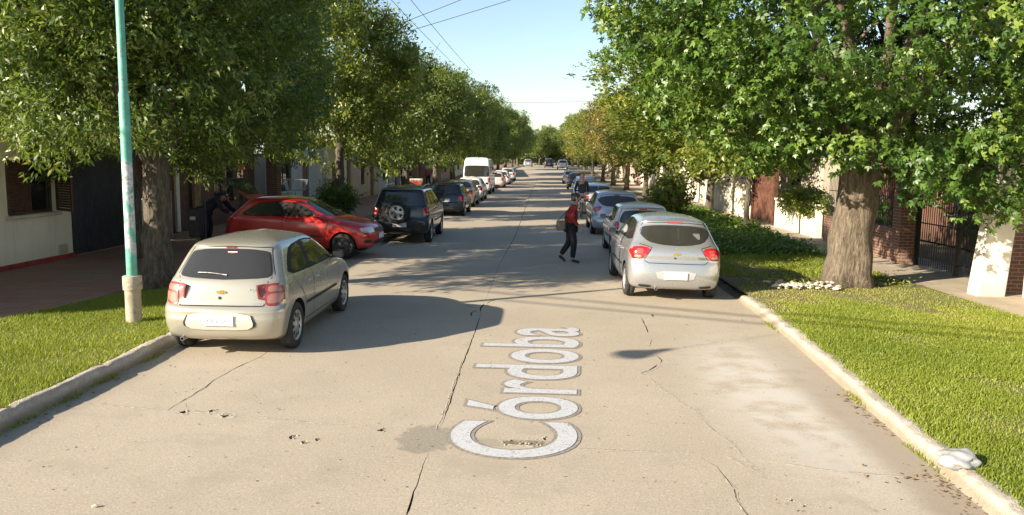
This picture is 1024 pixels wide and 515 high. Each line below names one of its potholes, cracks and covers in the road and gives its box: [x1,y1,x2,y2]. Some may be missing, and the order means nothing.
crack [169,344,279,410]
crack [642,319,766,515]
pothole [498,438,550,447]
crack [406,187,534,515]
